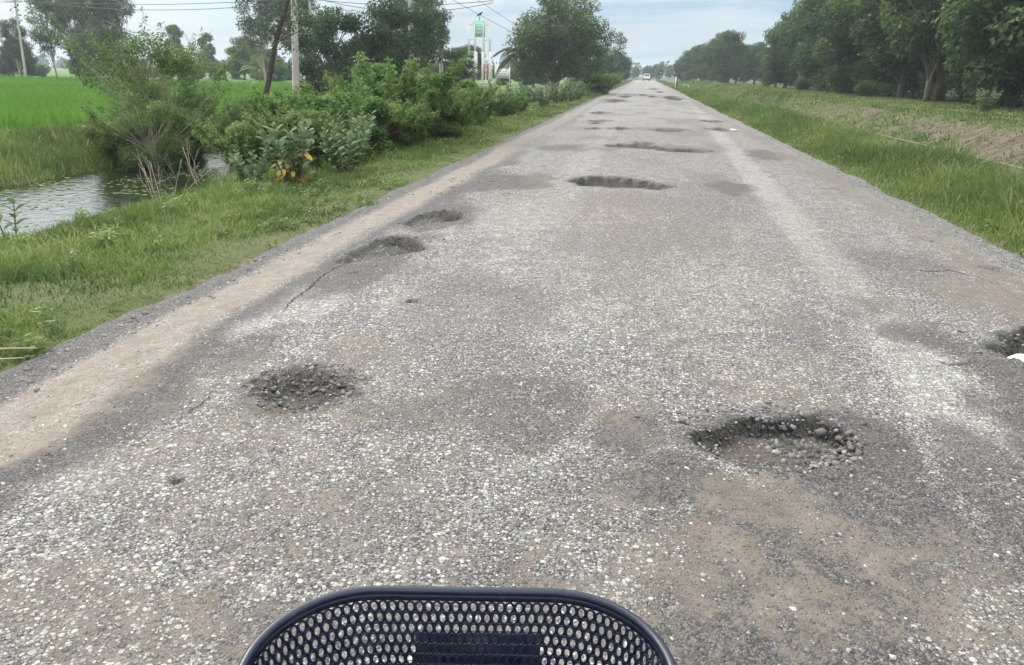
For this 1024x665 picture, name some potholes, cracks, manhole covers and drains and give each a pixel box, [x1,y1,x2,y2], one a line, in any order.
pothole [244,365,360,416]
pothole [337,235,424,264]
crack [286,263,345,307]
pothole [569,176,664,190]
pothole [986,327,1024,358]
pothole [400,211,462,227]
pothole [690,413,863,470]
